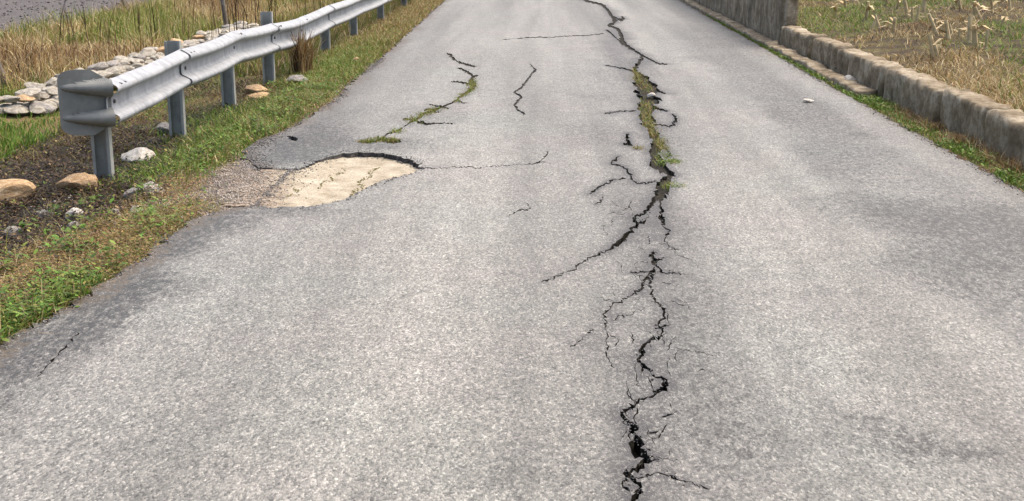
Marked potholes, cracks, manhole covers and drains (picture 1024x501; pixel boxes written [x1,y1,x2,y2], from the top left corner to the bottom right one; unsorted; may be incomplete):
crack [374,53,479,144]
pothole [223,152,422,208]
crack [38,333,79,376]
crack [542,0,713,501]
crack [423,151,549,169]
crack [513,64,537,115]
